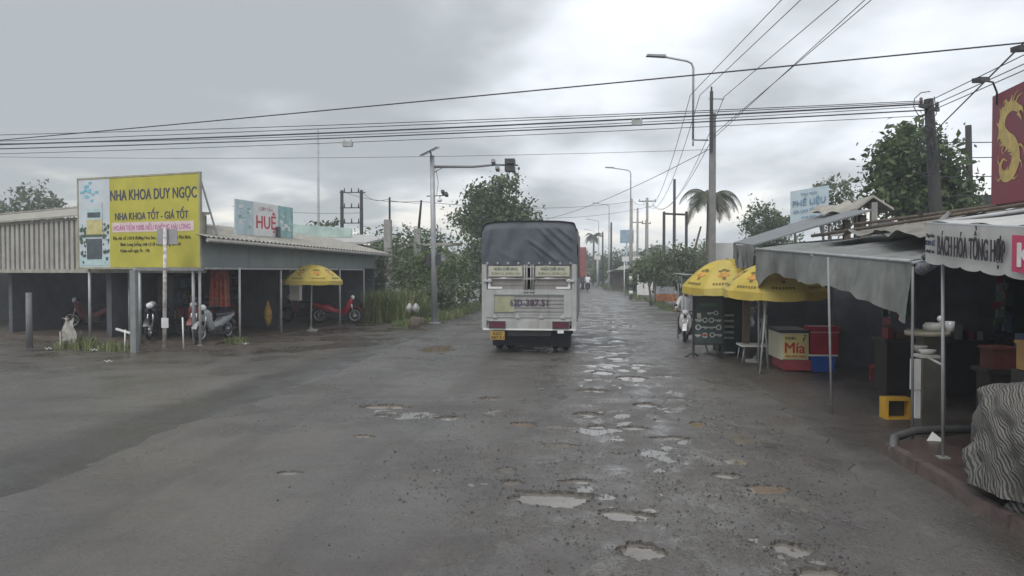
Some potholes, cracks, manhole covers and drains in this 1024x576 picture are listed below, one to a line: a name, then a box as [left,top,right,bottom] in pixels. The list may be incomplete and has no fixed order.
pothole [614,540,669,562]
pothole [597,508,659,522]
pothole [743,483,793,494]
pothole [505,489,599,508]
pothole [770,539,818,558]
pothole [416,345,456,353]
